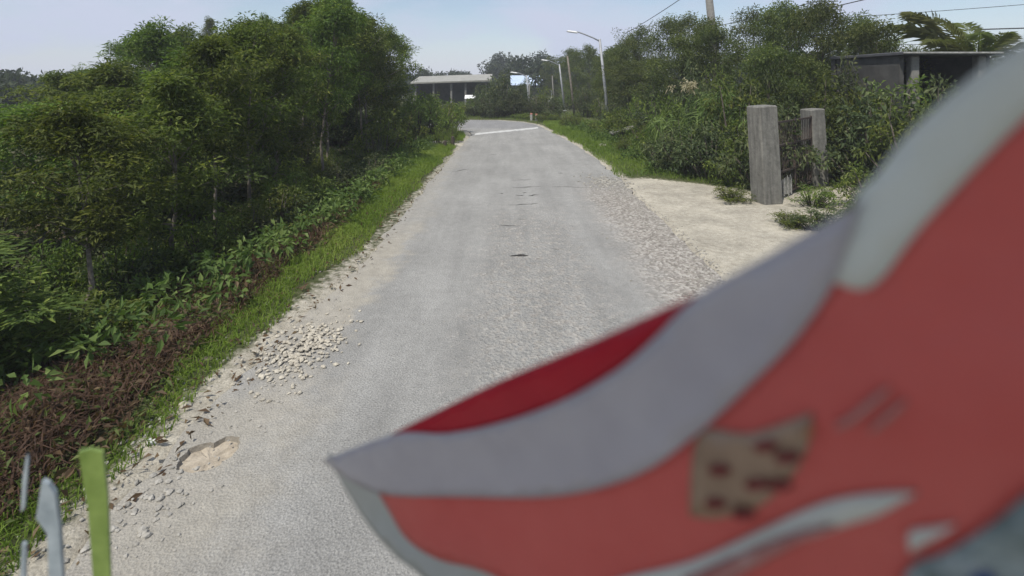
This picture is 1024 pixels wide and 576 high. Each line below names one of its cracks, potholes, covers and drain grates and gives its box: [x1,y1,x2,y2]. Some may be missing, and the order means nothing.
pothole [176,436,240,473]
